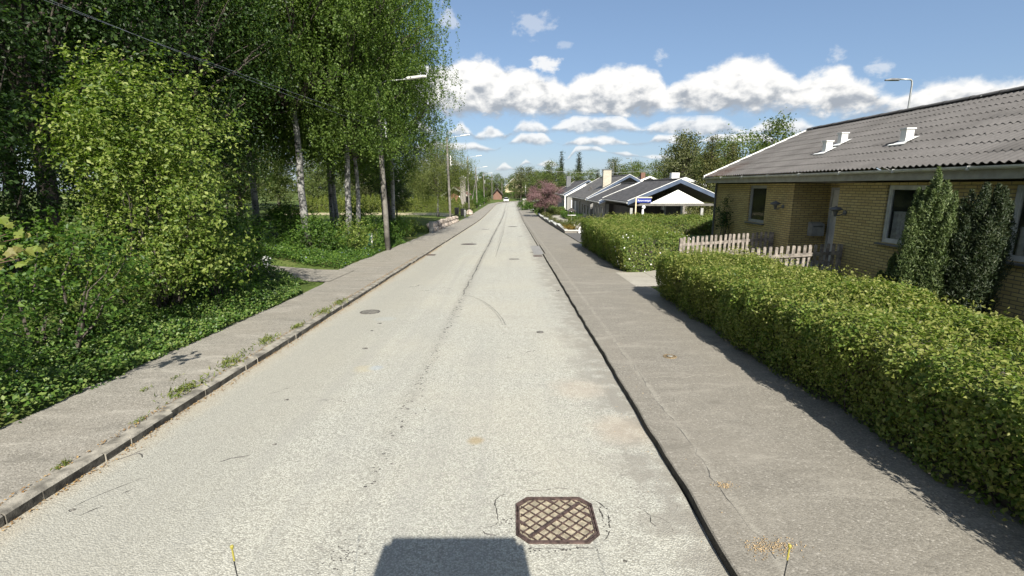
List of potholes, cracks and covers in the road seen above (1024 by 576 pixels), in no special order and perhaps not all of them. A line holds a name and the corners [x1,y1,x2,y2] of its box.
crack [73,477,145,515]
crack [522,498,611,553]
manhole cover [516,497,600,544]
crack [480,494,513,536]
